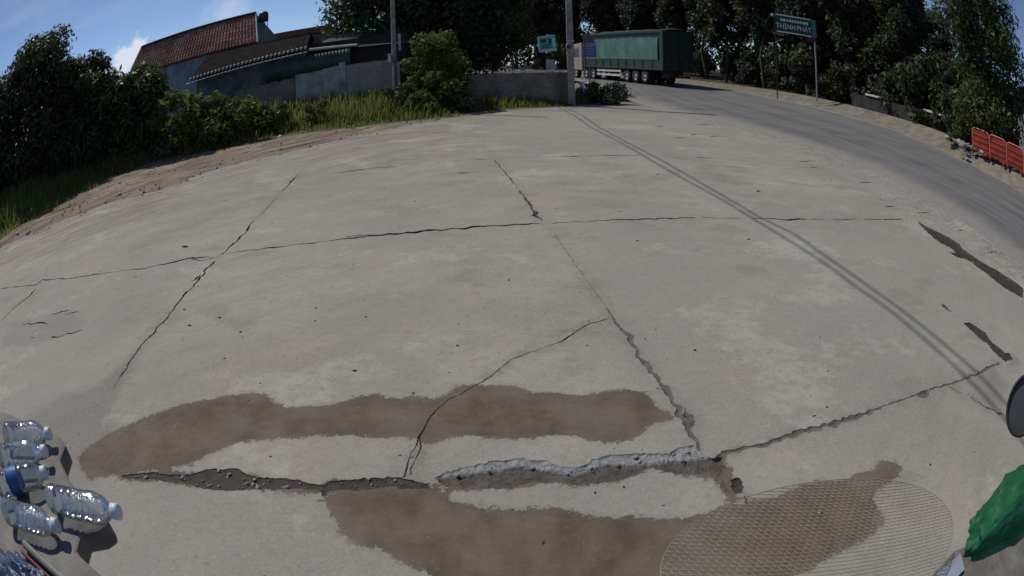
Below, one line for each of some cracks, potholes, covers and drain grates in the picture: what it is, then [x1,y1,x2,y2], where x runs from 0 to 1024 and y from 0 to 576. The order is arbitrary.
crack [402,161,1003,478]
